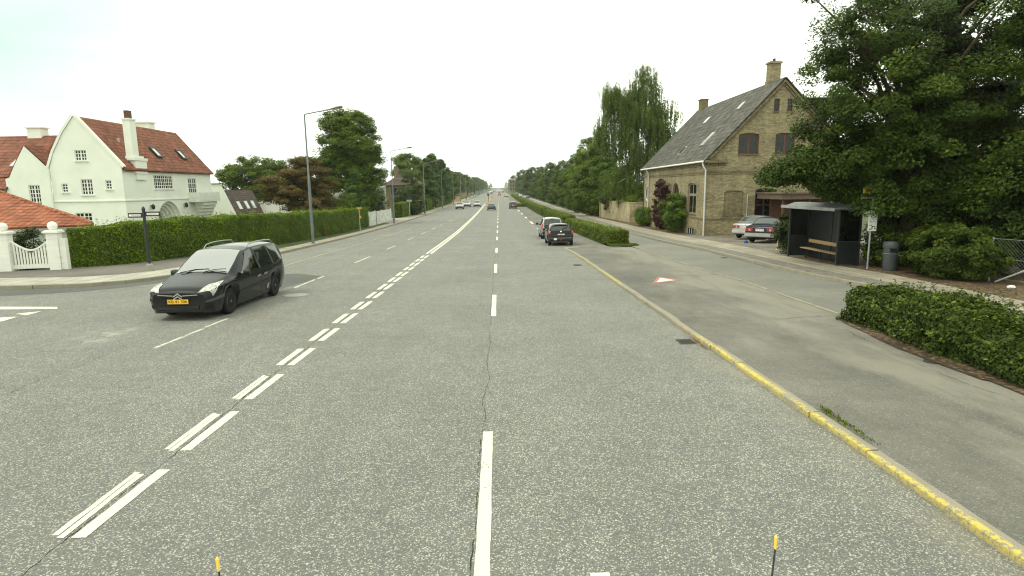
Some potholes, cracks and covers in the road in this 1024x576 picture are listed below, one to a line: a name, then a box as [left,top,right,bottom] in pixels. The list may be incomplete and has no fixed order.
crack [470,439,481,571]
